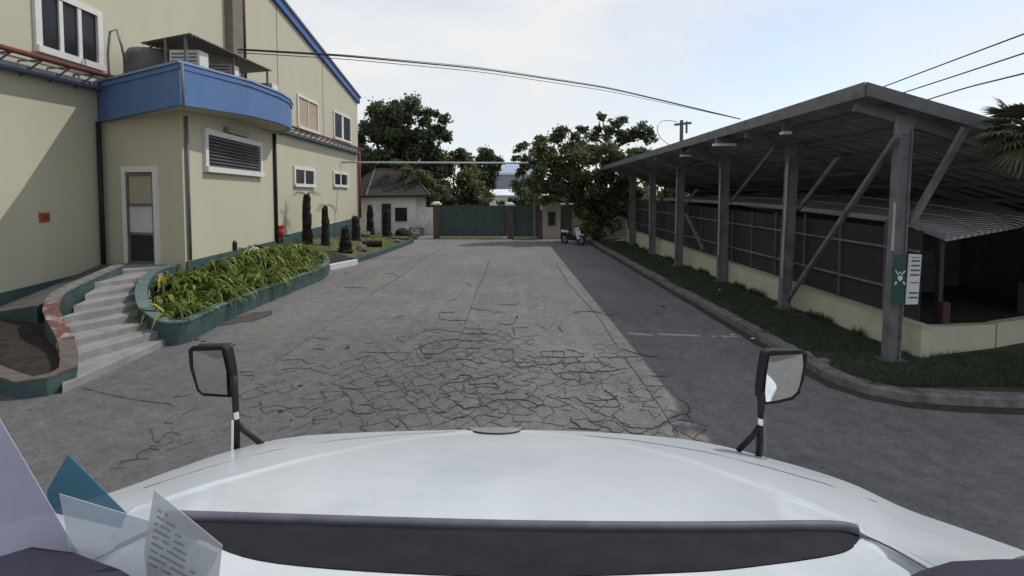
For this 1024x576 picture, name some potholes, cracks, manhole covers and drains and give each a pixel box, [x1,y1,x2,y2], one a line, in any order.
crack [240,283,708,443]
crack [86,388,198,468]
